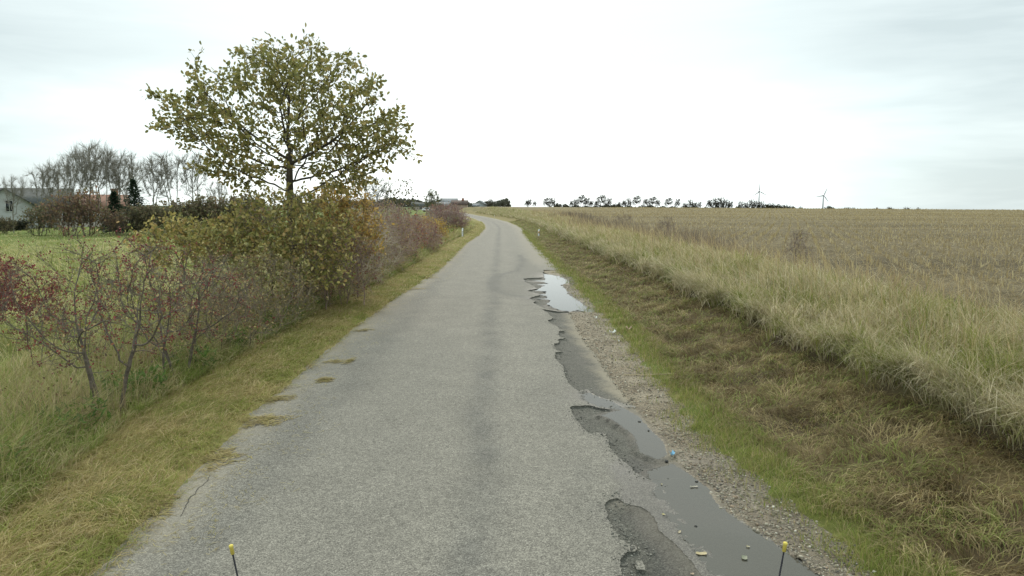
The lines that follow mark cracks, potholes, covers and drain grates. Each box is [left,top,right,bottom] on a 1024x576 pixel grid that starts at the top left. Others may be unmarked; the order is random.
pothole [605,498,702,576]
pothole [570,405,686,480]
pothole [543,309,631,405]
pothole [525,272,594,312]
